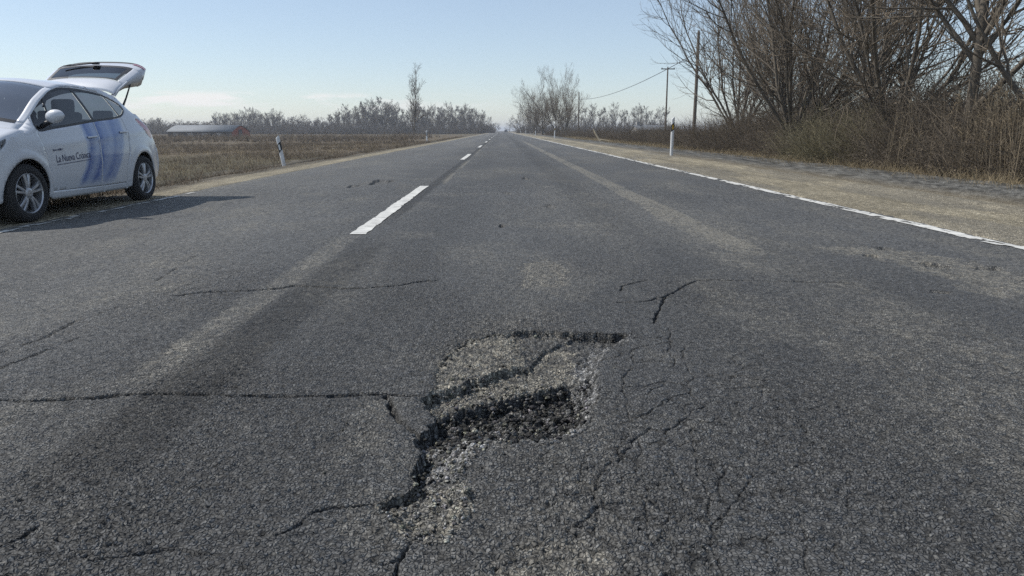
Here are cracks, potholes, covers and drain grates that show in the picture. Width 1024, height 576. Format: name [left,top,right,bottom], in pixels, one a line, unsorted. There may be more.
crack [0,306,121,370]
pothole [313,320,733,575]
crack [0,391,420,436]
crack [271,503,412,576]
crack [458,279,913,576]
